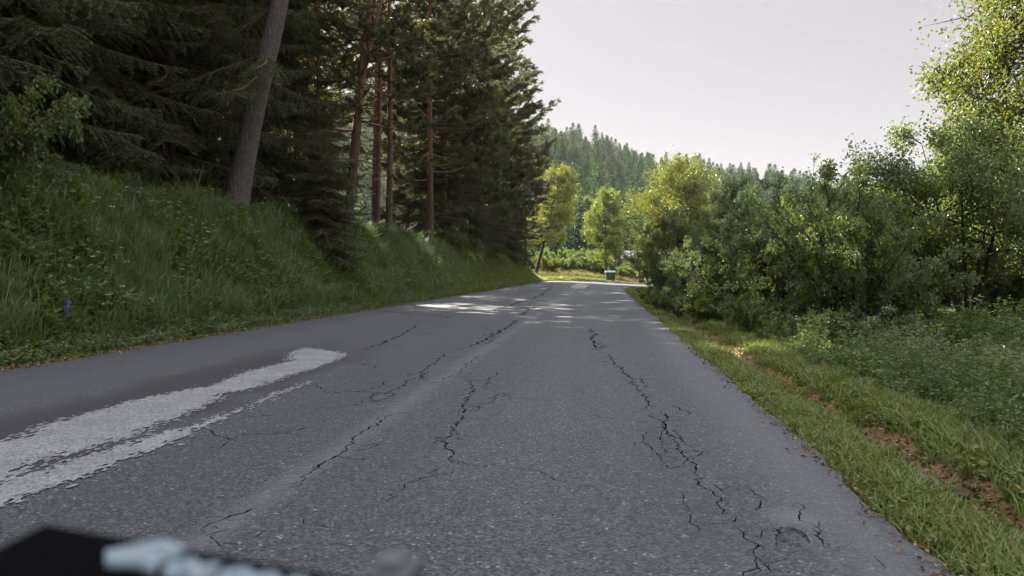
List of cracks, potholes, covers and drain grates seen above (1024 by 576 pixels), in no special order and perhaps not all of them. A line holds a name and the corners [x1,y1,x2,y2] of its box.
crack [798,504,851,549]
crack [586,353,797,576]
crack [205,286,598,506]
crack [192,508,268,546]
crack [577,328,616,353]
pothole [774,527,811,553]
